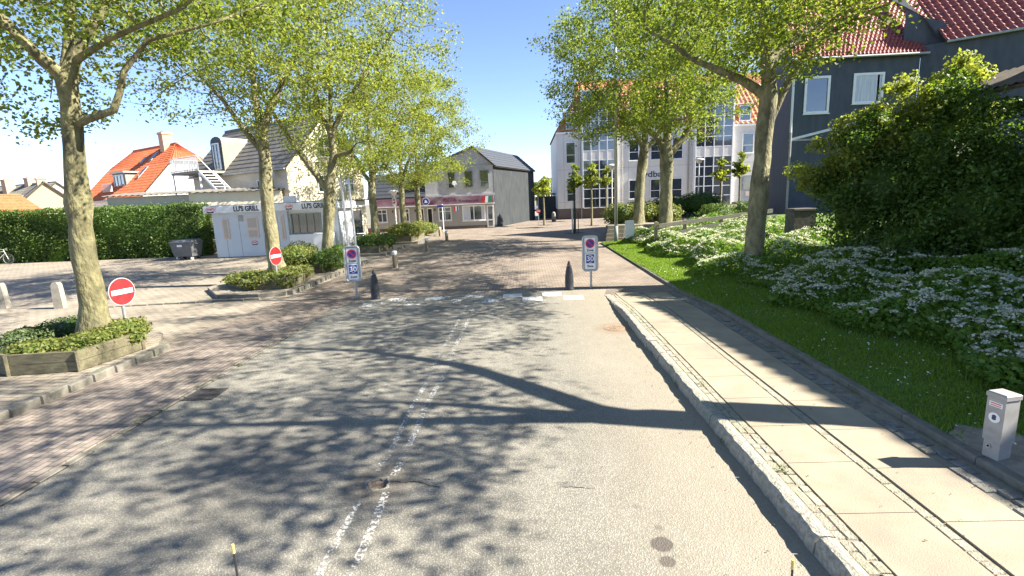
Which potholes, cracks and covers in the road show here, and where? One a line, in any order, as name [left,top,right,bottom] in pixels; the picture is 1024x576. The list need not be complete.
pothole [364,476,391,491]
drain grate [181,388,229,401]
